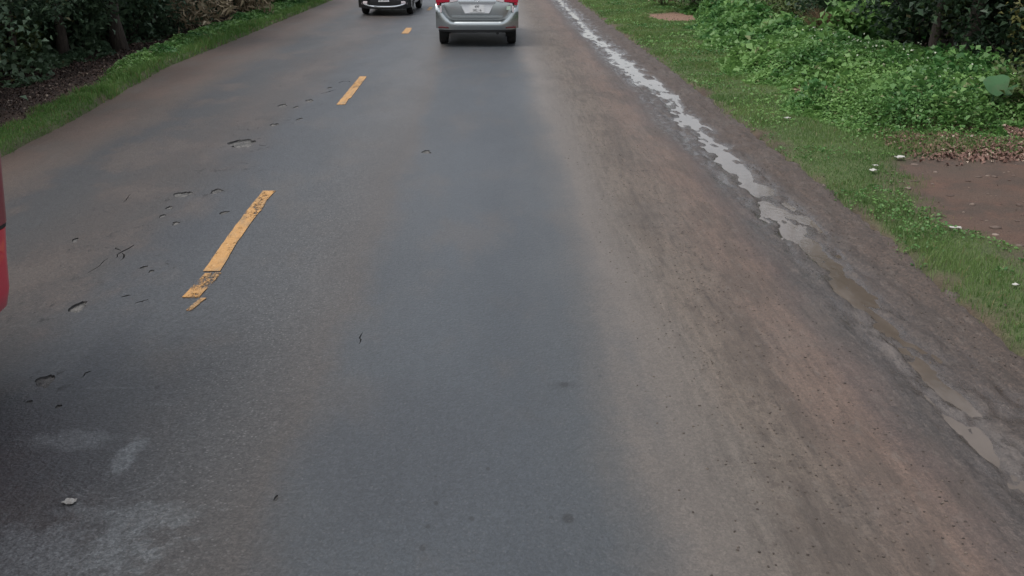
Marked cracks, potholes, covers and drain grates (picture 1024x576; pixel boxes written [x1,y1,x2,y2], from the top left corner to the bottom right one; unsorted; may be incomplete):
pothole [68,301,88,313]
pothole [34,374,55,388]
pothole [227,139,256,148]
crack [91,245,134,271]
